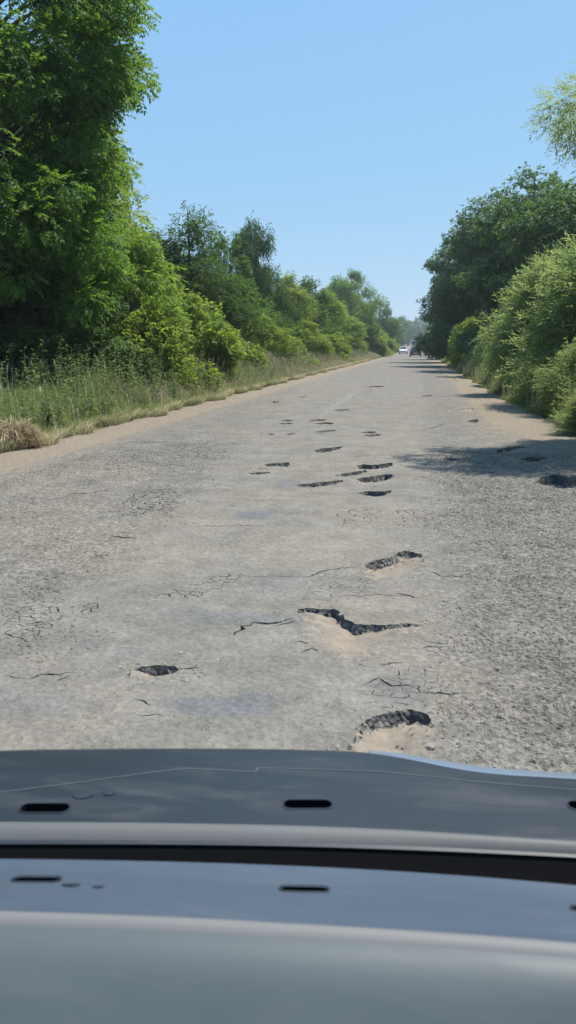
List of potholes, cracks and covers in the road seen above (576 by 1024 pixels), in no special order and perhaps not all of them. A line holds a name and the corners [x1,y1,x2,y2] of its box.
pothole [129,665,185,678]
pothole [295,608,432,659]
crack [233,618,318,653]
pothole [536,475,576,489]
pothole [357,474,394,483]
pothole [346,709,438,760]
pothole [360,551,427,586]
crack [361,643,473,702]
